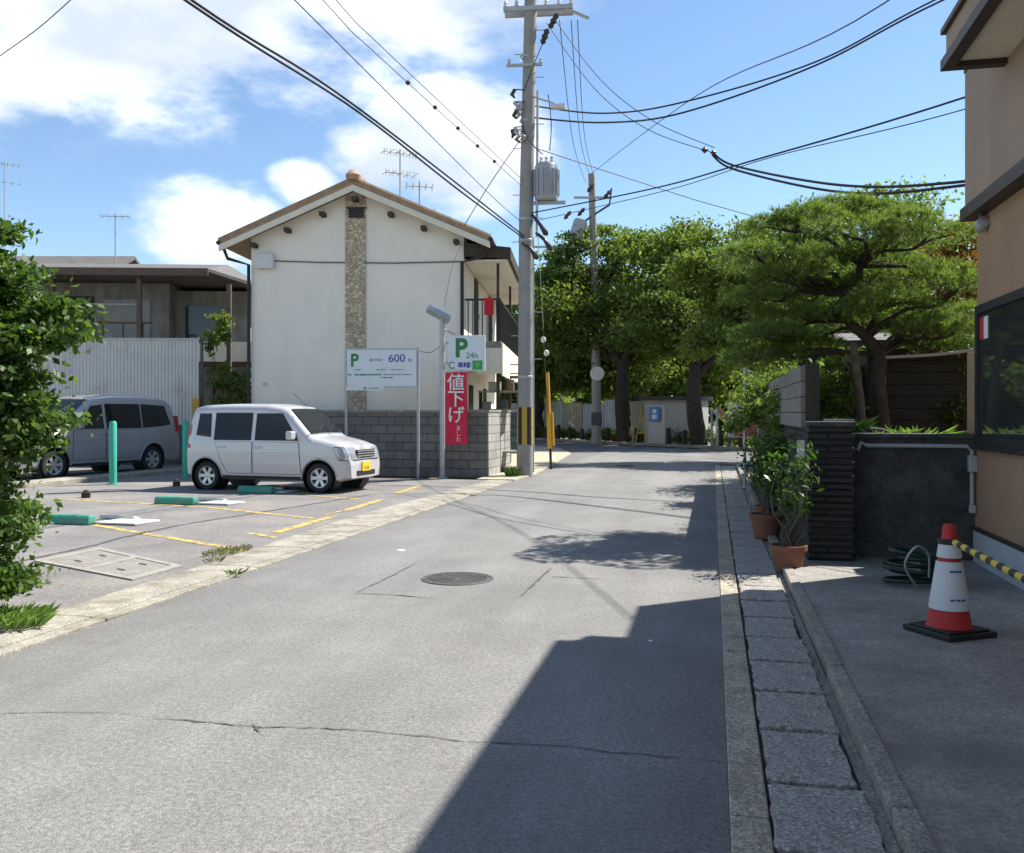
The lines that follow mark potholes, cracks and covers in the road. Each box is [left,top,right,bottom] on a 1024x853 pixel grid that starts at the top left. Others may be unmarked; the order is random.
manhole cover [421,572,494,585]
crack [2,712,720,762]
